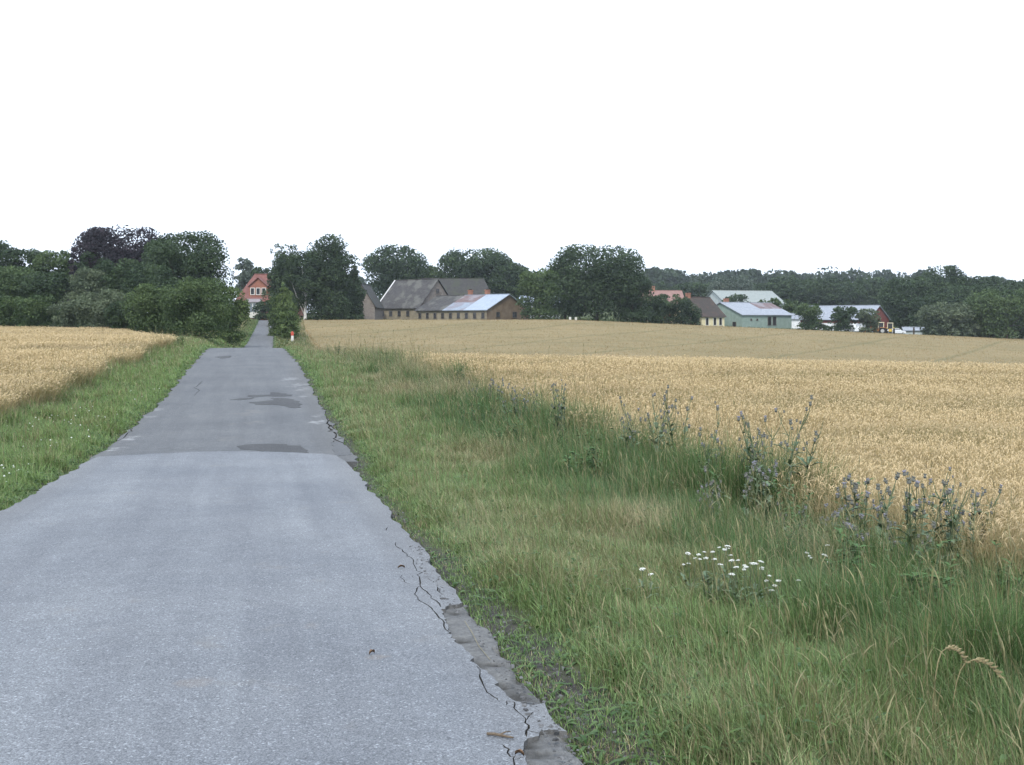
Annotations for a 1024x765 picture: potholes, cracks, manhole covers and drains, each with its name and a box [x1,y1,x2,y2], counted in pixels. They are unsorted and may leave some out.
crack [386,527,449,632]
crack [326,419,343,443]
crack [477,666,538,765]
